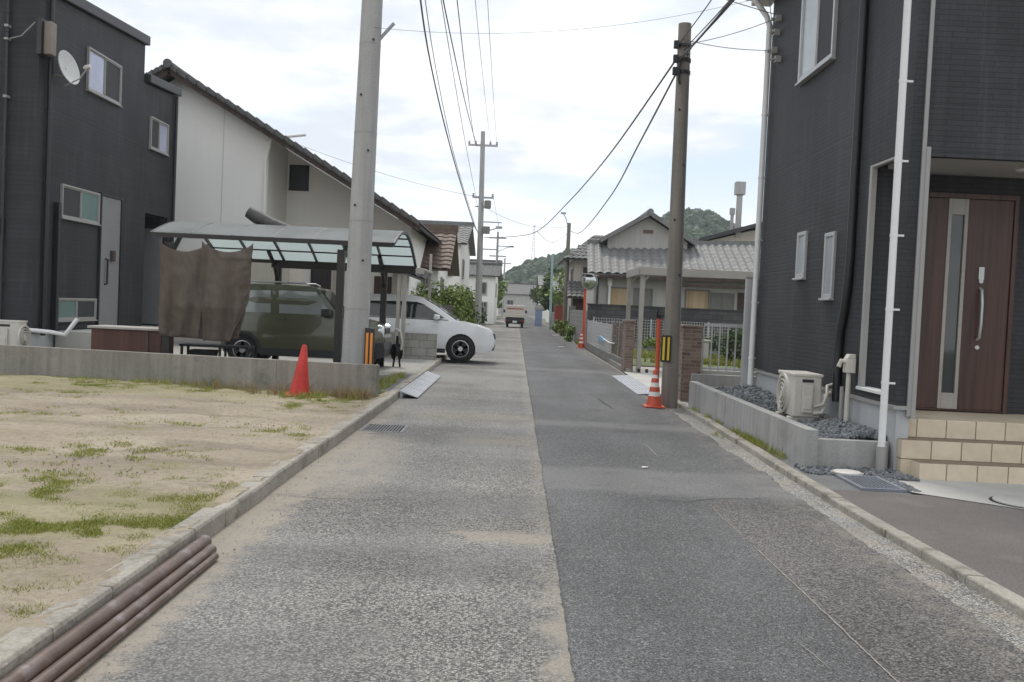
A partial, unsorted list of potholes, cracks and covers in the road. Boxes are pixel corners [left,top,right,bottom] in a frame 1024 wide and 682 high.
drain grate [835,474,908,493]
manhole cover [989,495,1024,508]
drain grate [359,424,409,433]
